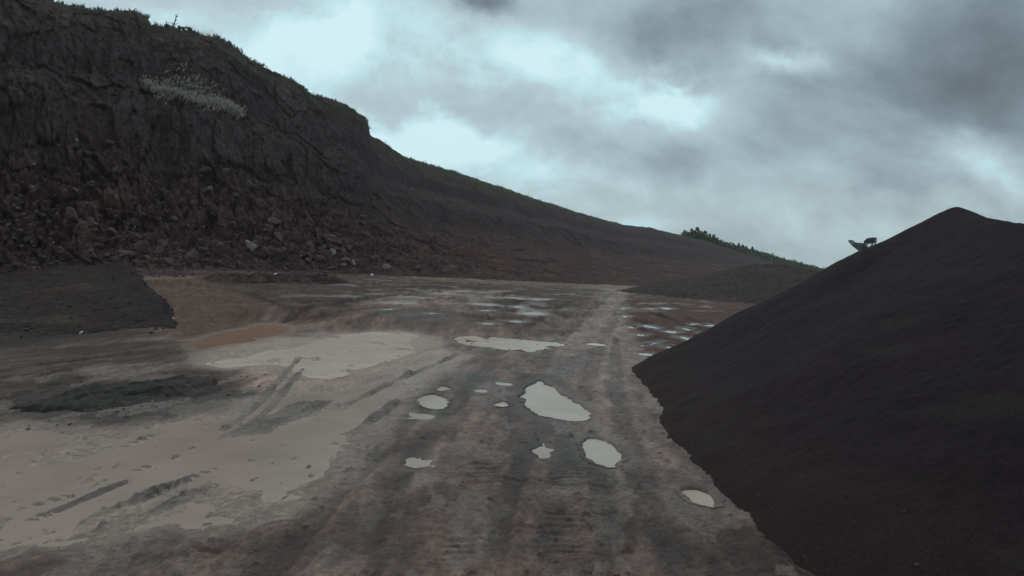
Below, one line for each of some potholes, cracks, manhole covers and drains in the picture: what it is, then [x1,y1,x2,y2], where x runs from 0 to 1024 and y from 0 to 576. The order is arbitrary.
pothole [412,392,454,410]
